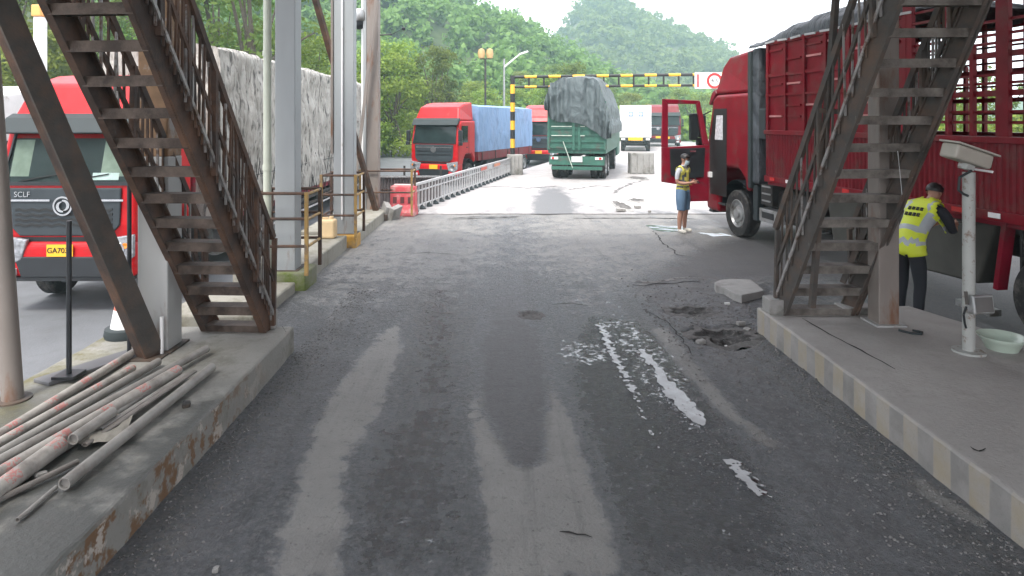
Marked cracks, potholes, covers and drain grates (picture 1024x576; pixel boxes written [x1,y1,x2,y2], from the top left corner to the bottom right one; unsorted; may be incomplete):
pothole [661,305,721,320]
crack [492,181,641,193]
pothole [518,310,546,320]
pothole [682,326,766,351]
crack [628,277,695,286]
